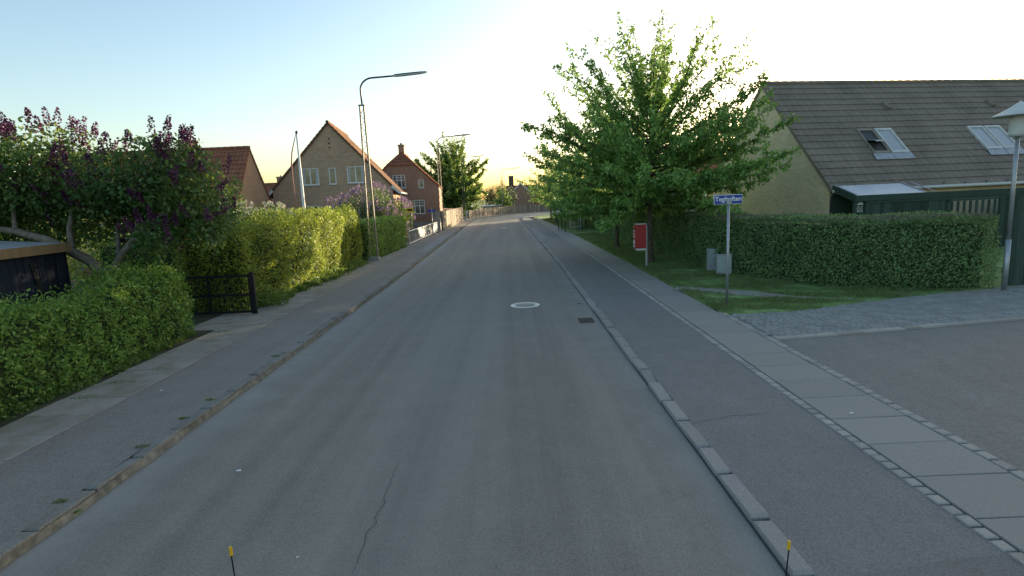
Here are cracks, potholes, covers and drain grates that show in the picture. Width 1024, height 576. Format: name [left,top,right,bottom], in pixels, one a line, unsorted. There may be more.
crack [352,458,400,573]
